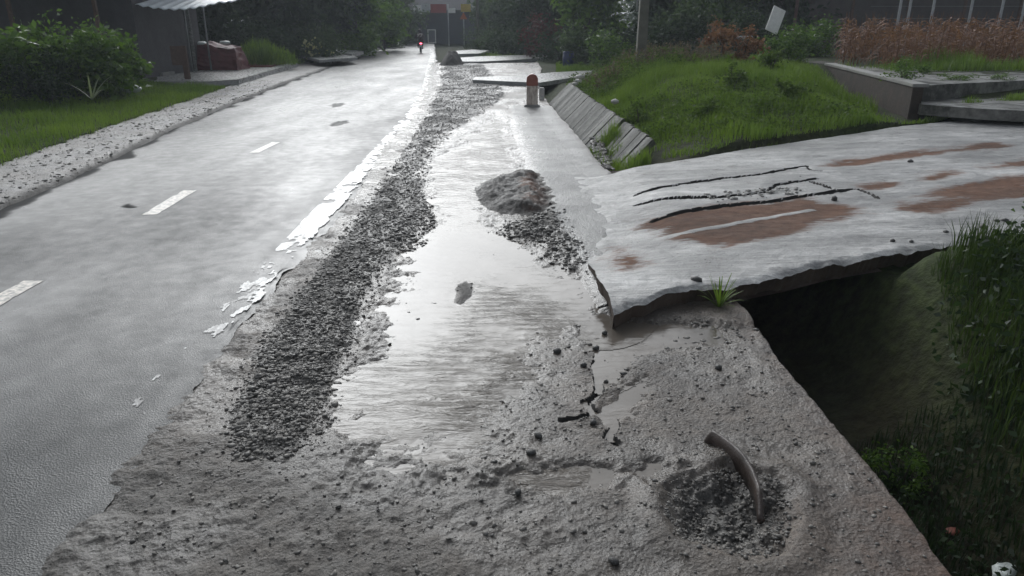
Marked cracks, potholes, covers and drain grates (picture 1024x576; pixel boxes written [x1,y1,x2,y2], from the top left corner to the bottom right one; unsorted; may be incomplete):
crack [633,165,880,223]
pothole [658,456,806,559]
crack [558,304,623,446]
